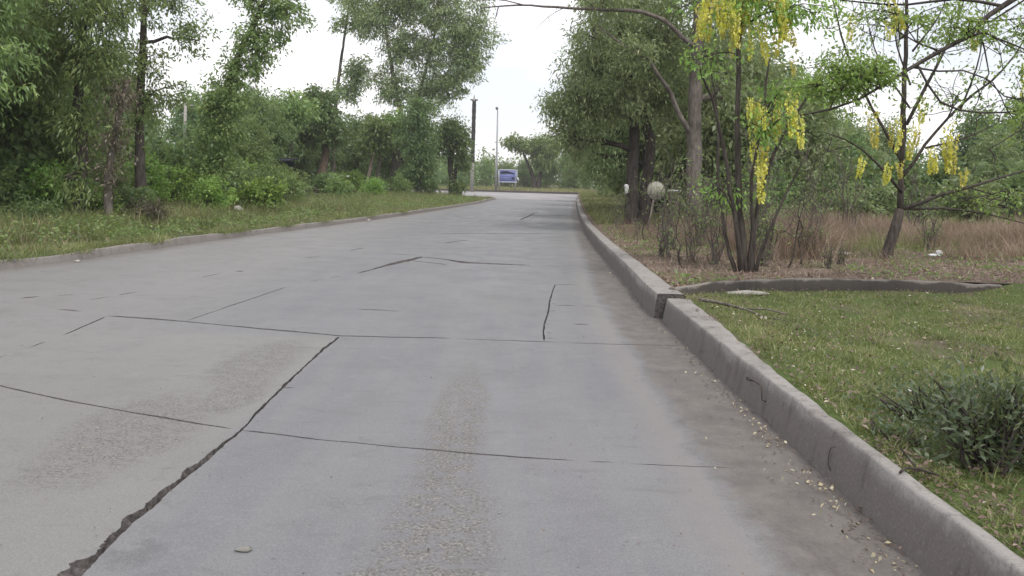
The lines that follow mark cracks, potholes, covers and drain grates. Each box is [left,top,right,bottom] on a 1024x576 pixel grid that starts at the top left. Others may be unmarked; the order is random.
crack [543,284,574,340]
crack [2,240,519,357]
